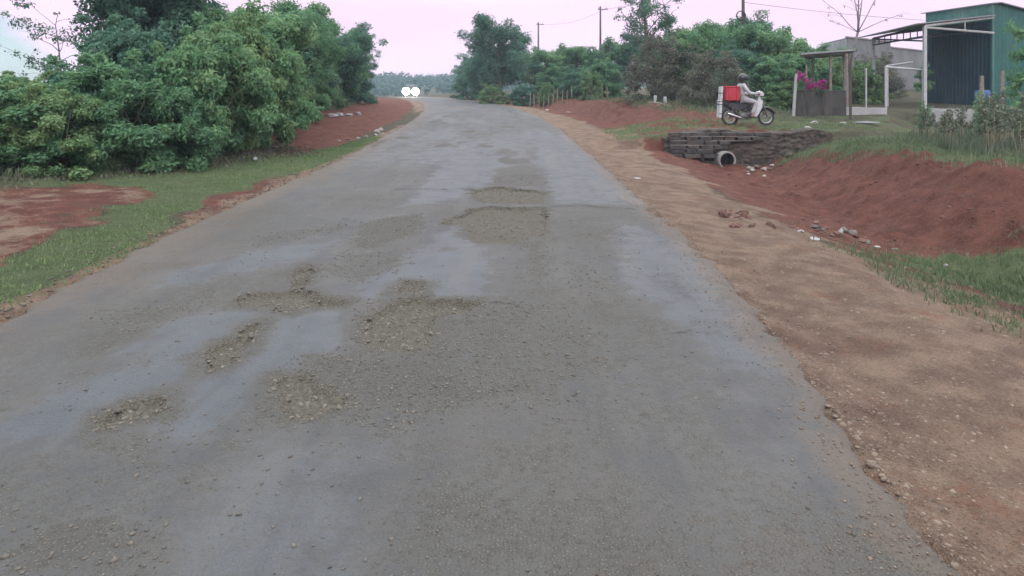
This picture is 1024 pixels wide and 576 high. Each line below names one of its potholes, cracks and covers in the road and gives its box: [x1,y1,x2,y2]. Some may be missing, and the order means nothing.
pothole [467,186,548,204]
pothole [233,264,350,313]
pothole [263,373,354,422]
pothole [90,392,176,433]
pothole [439,206,551,243]
pothole [359,295,483,353]
pothole [198,322,265,374]
